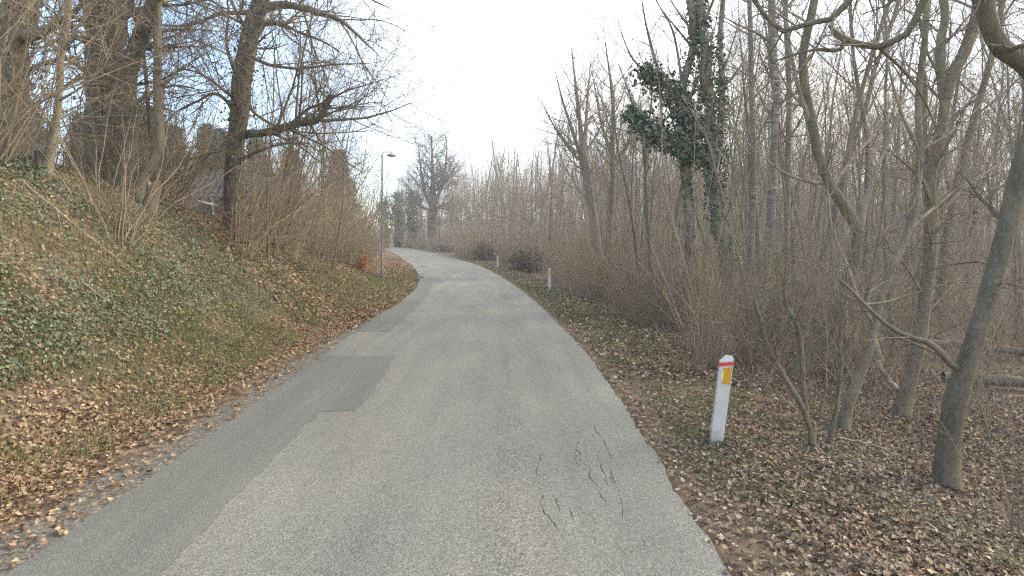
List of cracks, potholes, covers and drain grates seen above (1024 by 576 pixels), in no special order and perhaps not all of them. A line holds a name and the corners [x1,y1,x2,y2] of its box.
crack [535,427,624,544]
